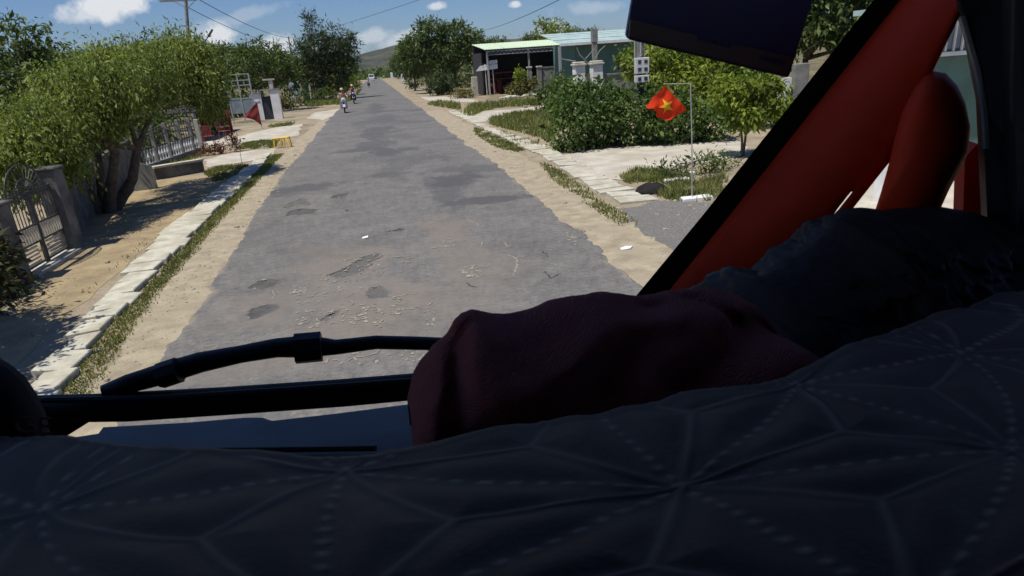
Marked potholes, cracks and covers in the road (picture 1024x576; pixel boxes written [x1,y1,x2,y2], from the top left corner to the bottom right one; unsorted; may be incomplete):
pothole [245,303,280,320]
pothole [284,208,318,216]
pothole [281,198,311,209]
pothole [363,285,392,300]
pothole [244,278,281,290]
pothole [324,253,384,279]
